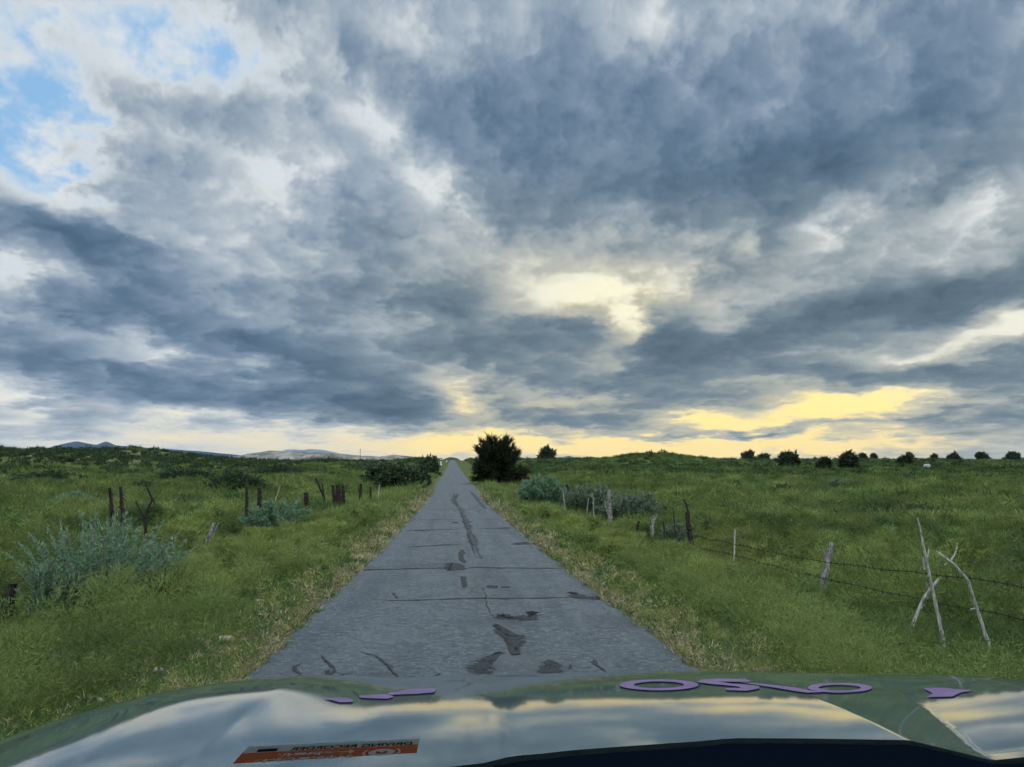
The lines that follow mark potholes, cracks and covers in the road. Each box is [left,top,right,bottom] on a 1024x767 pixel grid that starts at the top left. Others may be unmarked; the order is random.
crack [363,652,398,678]
crack [393,587,587,613]
crack [292,655,350,676]
